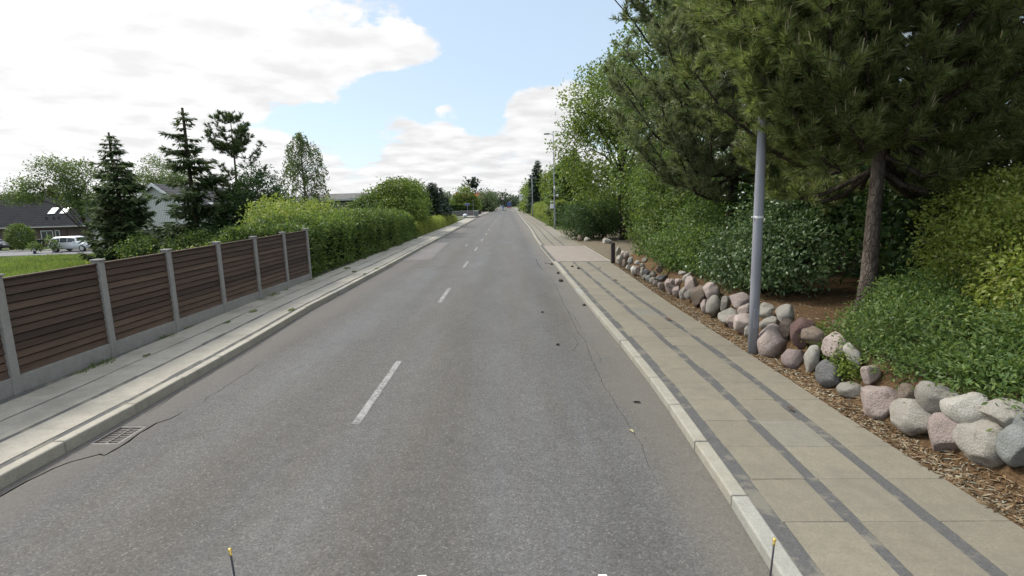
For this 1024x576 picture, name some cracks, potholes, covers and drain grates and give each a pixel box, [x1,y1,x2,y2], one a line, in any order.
crack [0,412,183,497]
drain grate [90,426,146,444]
